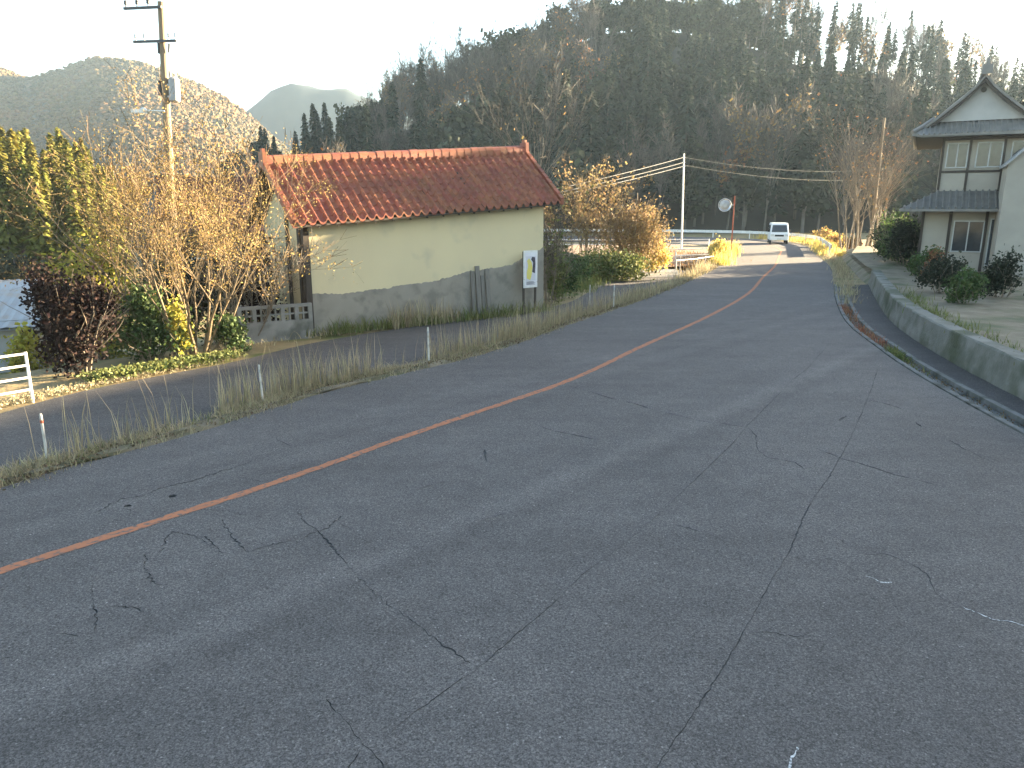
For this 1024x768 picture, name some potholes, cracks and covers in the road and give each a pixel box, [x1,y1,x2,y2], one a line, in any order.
crack [143,509,470,663]
crack [326,699,384,768]
crack [570,386,935,485]
crack [841,540,1024,626]
crack [90,436,341,513]
crack [788,747,799,768]
